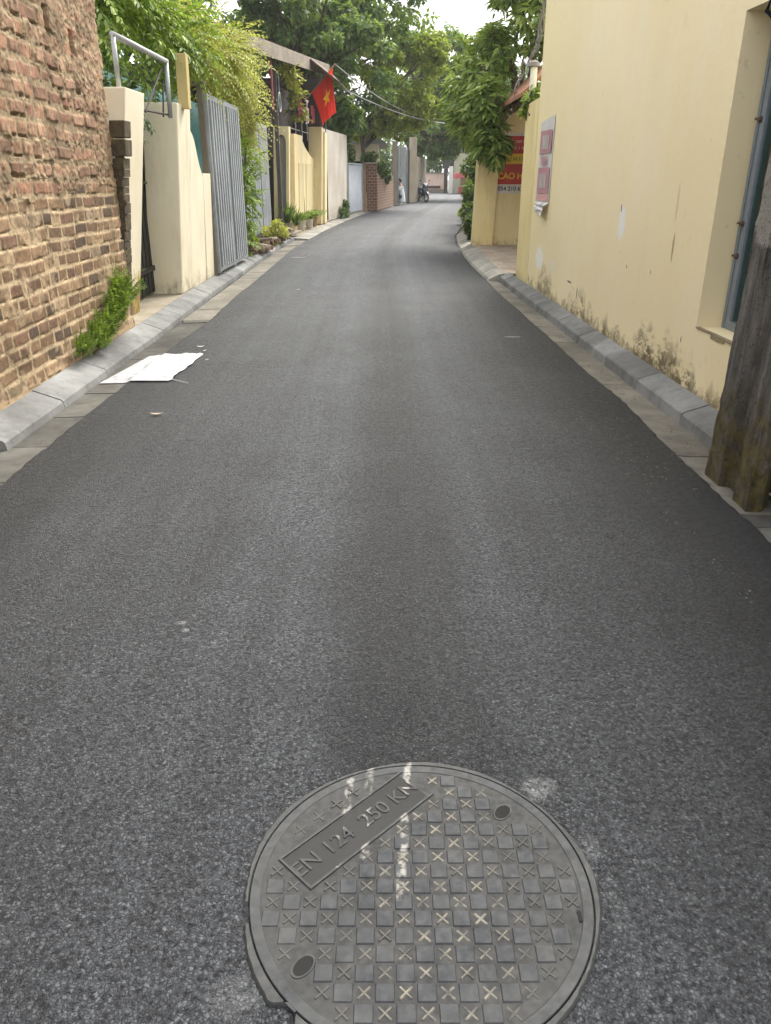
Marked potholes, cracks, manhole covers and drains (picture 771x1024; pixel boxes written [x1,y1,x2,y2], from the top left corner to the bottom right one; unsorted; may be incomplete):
manhole cover [243,762,602,1024]
